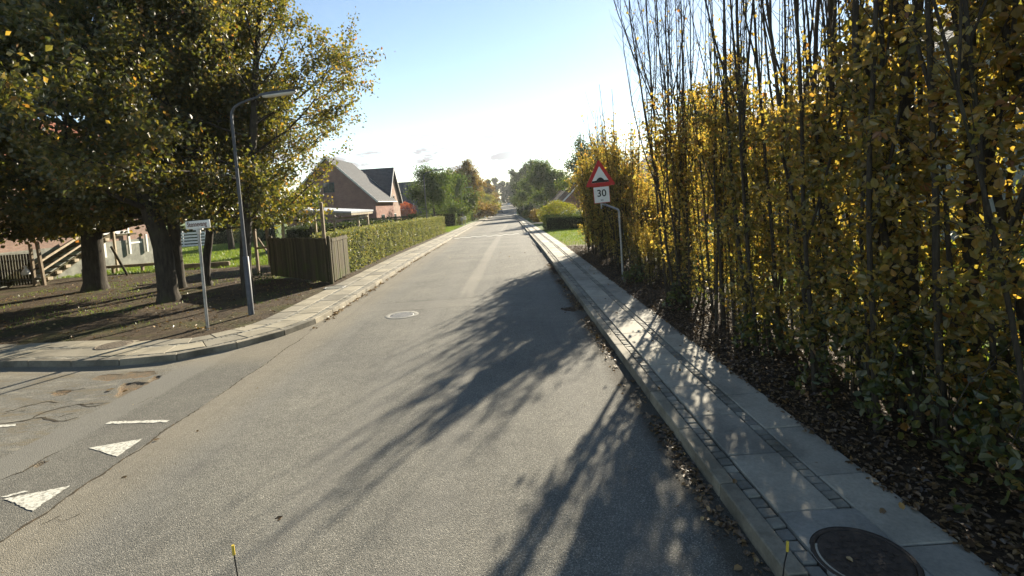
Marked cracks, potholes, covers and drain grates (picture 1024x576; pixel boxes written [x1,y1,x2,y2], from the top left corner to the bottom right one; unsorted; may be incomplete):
crack [0,335,306,542]
pothole [114,375,163,397]
manhole cover [385,311,419,319]
manhole cover [779,508,932,576]
